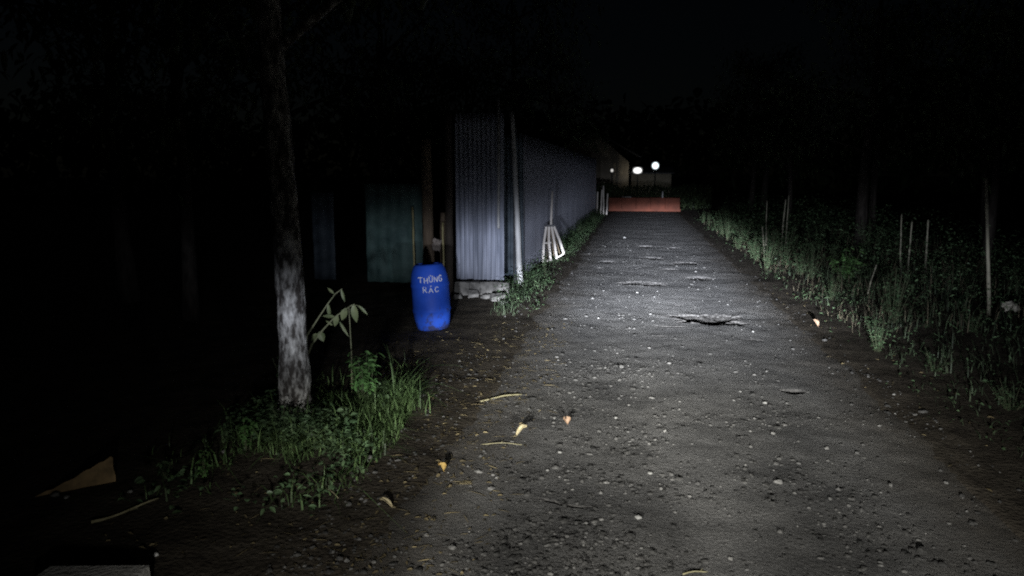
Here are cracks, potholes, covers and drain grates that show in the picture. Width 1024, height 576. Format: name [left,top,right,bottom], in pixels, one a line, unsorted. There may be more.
pothole [657,313,751,327]
